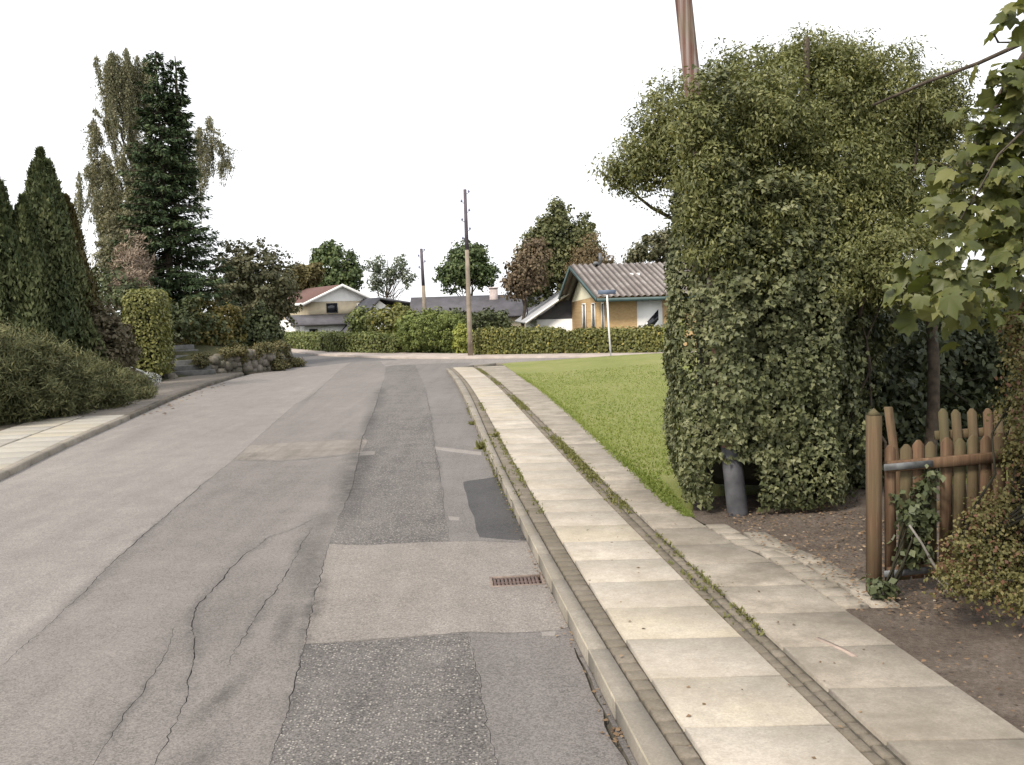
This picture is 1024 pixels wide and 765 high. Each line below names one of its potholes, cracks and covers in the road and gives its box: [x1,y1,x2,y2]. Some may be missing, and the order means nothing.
crack [154,513,327,765]
drain grate [489,574,546,587]
crack [93,628,174,765]
